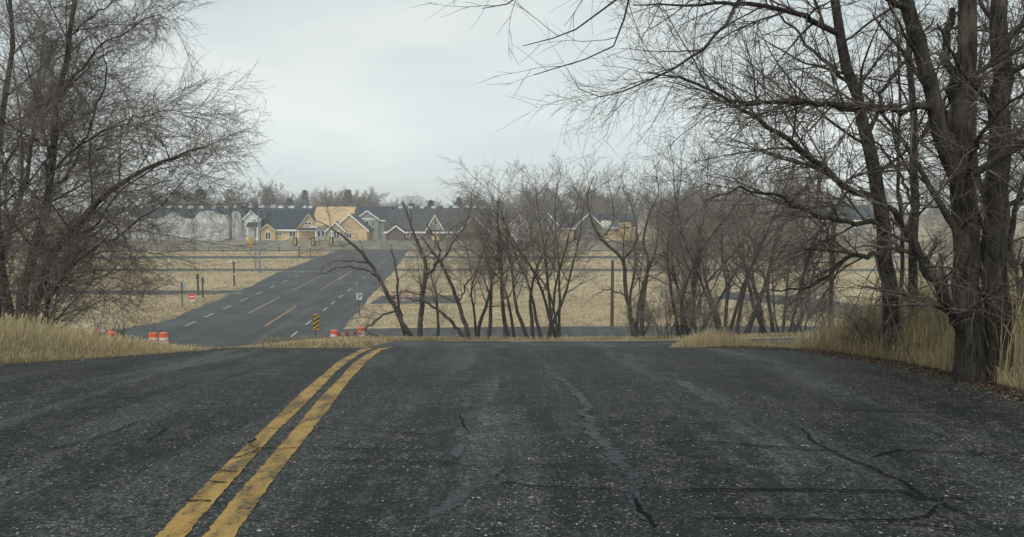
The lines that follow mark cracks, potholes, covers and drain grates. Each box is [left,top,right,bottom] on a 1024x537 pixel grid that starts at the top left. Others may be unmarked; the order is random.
crack [1,409,1005,530]
